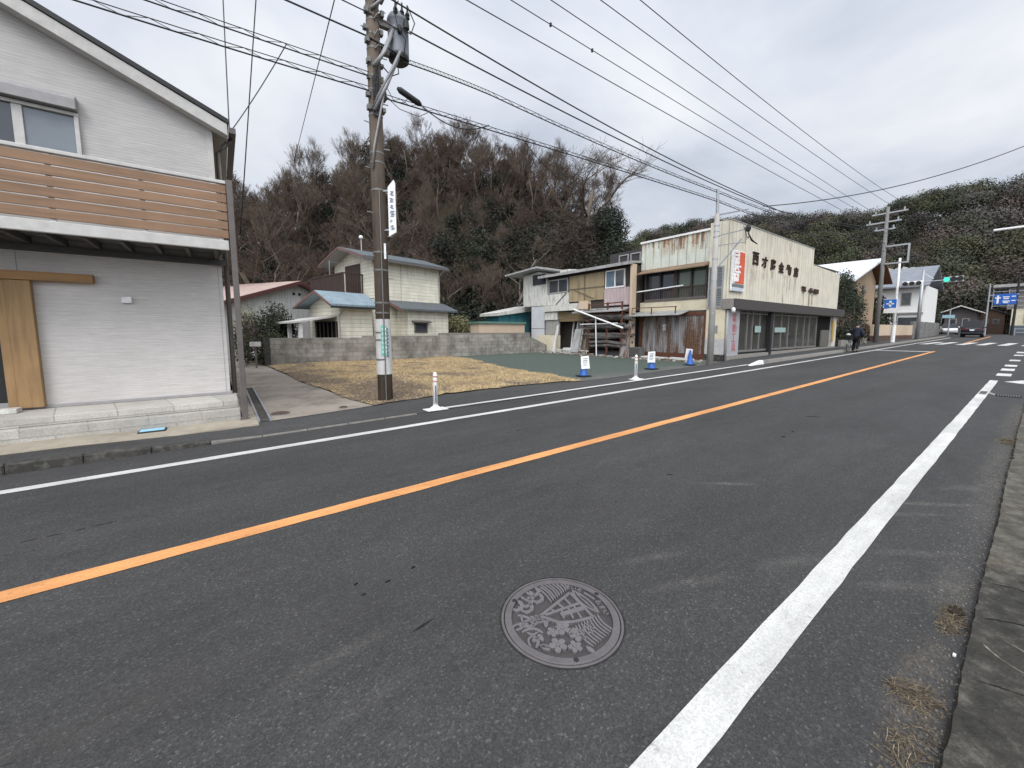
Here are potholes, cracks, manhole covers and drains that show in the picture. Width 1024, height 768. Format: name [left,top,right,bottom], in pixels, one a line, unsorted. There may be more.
manhole cover [499,577,626,670]
